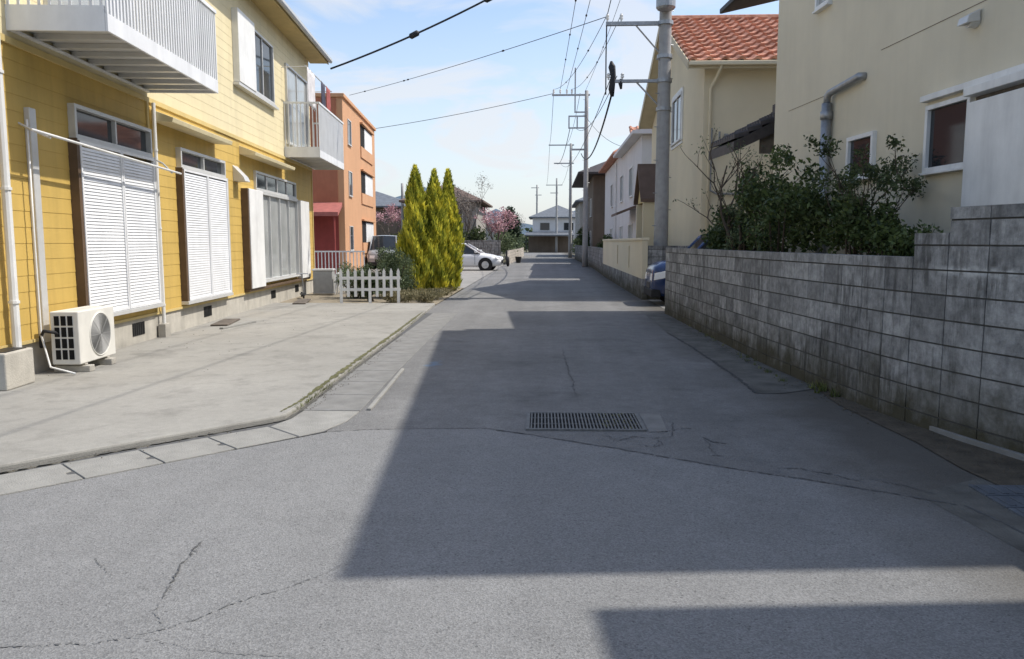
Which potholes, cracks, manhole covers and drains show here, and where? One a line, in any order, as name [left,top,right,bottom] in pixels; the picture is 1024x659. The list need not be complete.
crack [605,421,722,456]
drain grate [526,412,647,432]
crack [0,542,352,658]
